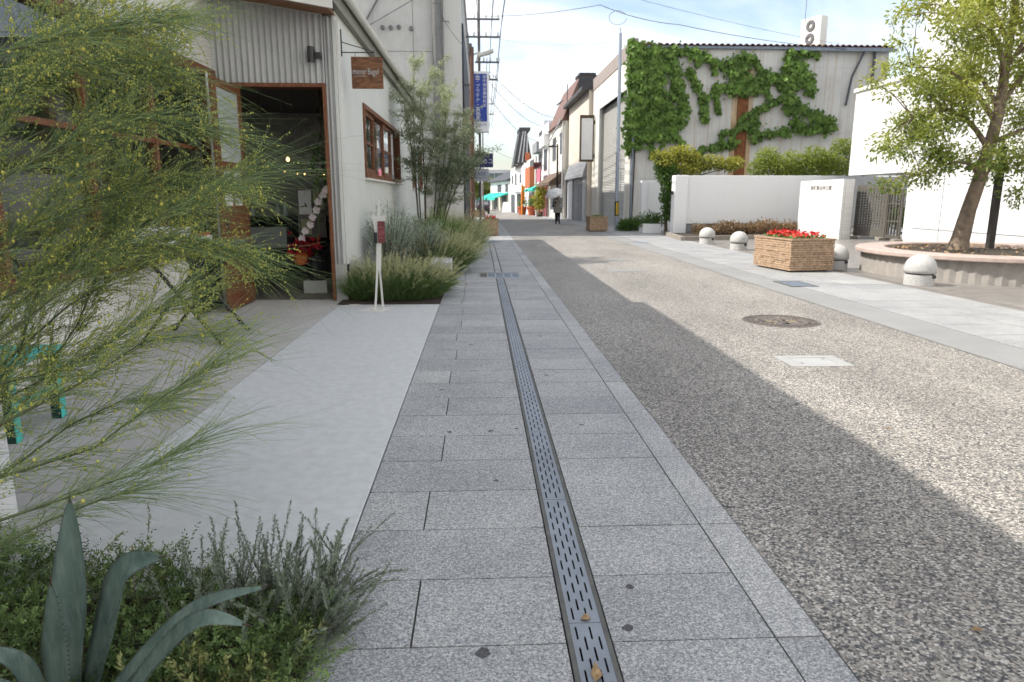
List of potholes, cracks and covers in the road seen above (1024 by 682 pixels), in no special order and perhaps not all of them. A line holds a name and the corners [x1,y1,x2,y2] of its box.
utility cover [773,355,855,367]
manhole cover [742,315,821,328]
